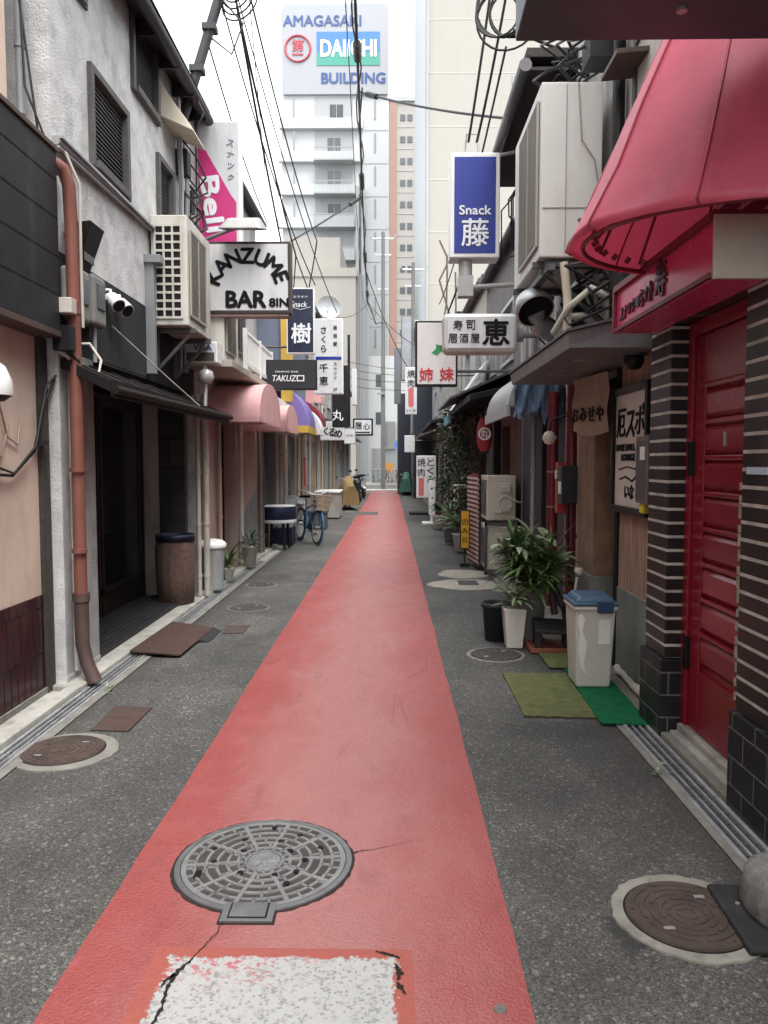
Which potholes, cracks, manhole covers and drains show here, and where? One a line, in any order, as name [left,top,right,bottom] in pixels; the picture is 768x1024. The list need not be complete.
manhole cover [170,820,355,925]
crack [376,950,406,994]
manhole cover [466,648,525,663]
manhole cover [611,874,762,966]
drain grate [687,797,768,863]
drain grate [623,724,718,800]
manhole cover [226,603,271,612]
crack [151,921,223,1024]
manhole cover [9,733,119,772]
